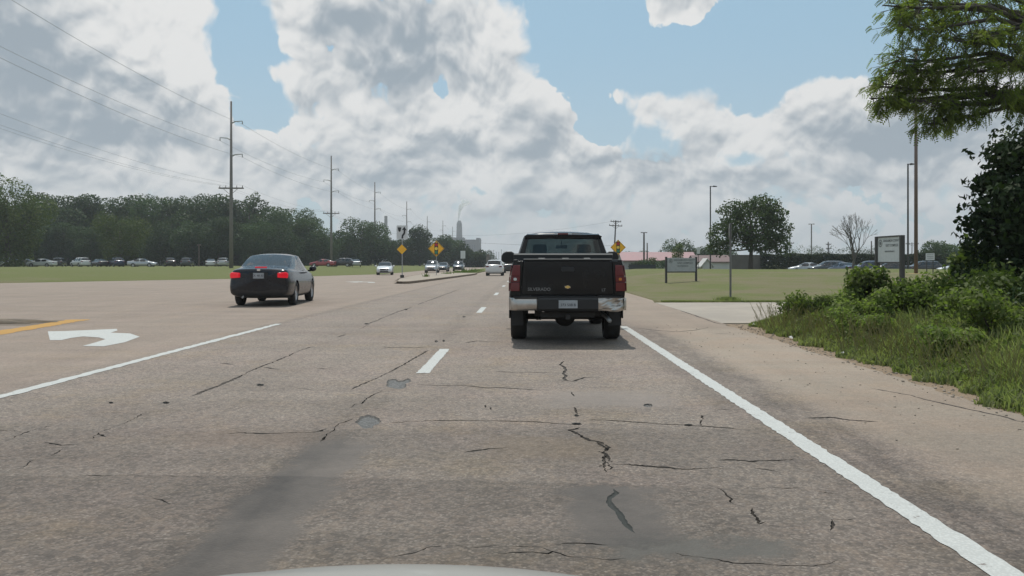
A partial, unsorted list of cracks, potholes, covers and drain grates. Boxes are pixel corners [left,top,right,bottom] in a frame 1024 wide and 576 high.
crack [718,488,764,524]
crack [393,361,835,494]
crack [193,289,459,396]
crack [368,543,626,560]
crack [877,389,1023,423]
